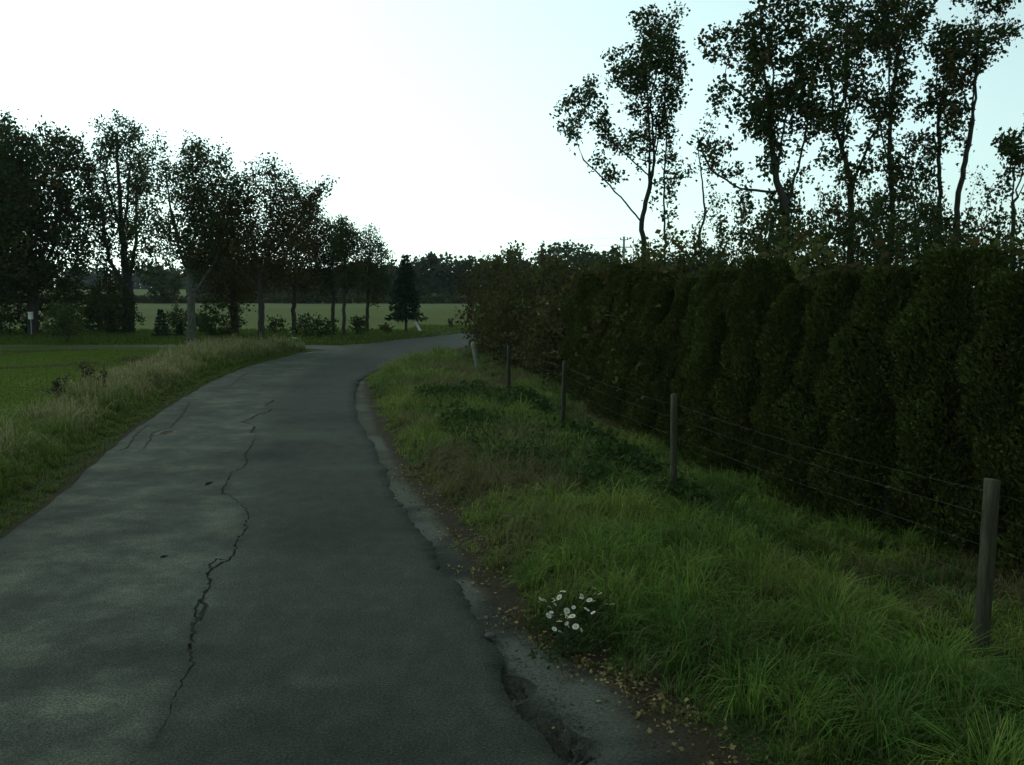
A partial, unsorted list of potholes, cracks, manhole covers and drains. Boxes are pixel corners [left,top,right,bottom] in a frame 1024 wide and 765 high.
pothole [523,713,603,765]
pothole [502,675,537,705]
crack [154,371,274,755]
crack [116,402,190,453]
